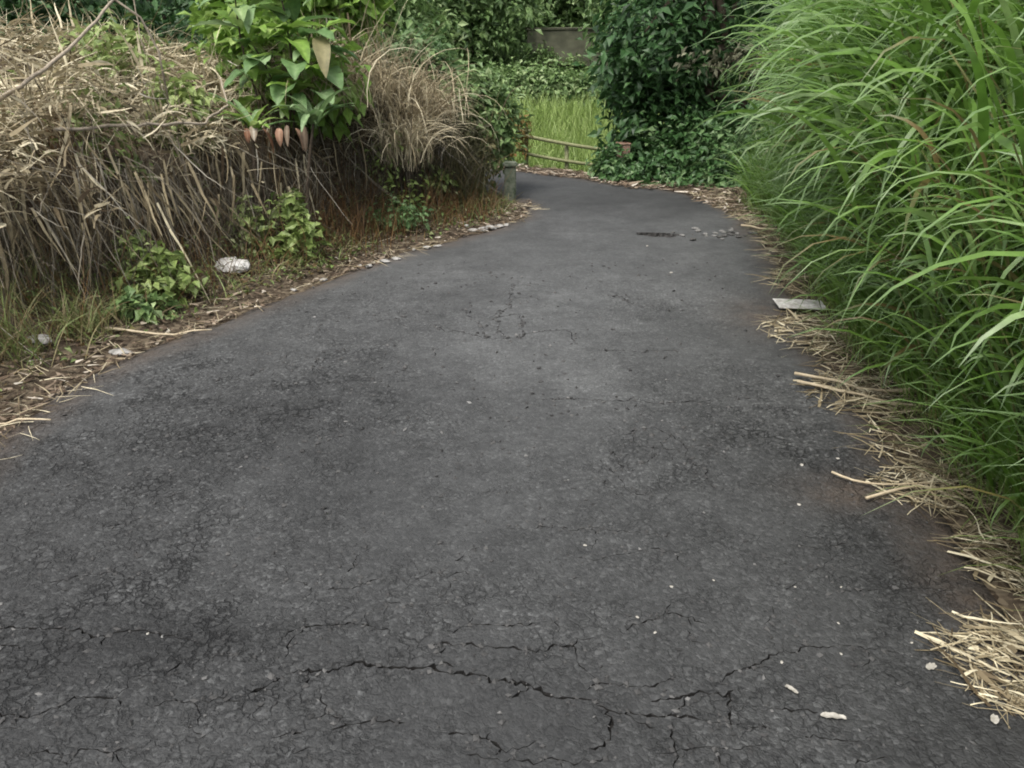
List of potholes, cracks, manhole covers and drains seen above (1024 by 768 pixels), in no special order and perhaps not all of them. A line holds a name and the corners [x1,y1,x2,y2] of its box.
crack [433,288,576,345]
crack [0,626,205,649]
crack [153,544,898,768]
crack [27,748,127,767]
crack [0,663,182,729]
